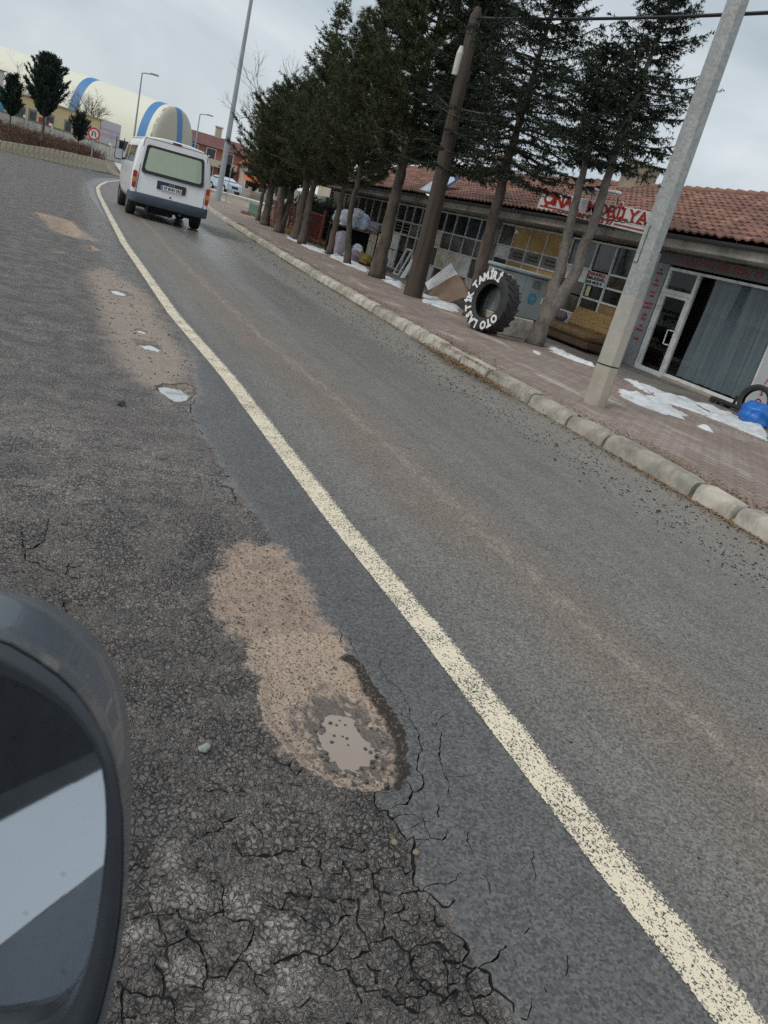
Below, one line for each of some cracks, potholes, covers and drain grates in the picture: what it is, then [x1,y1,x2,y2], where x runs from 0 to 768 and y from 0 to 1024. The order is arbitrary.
pothole [129,337,166,352]
crack [116,656,547,1024]
pothole [154,383,198,402]
pothole [106,289,137,297]
crack [12,515,83,613]
pothole [244,632,412,794]
